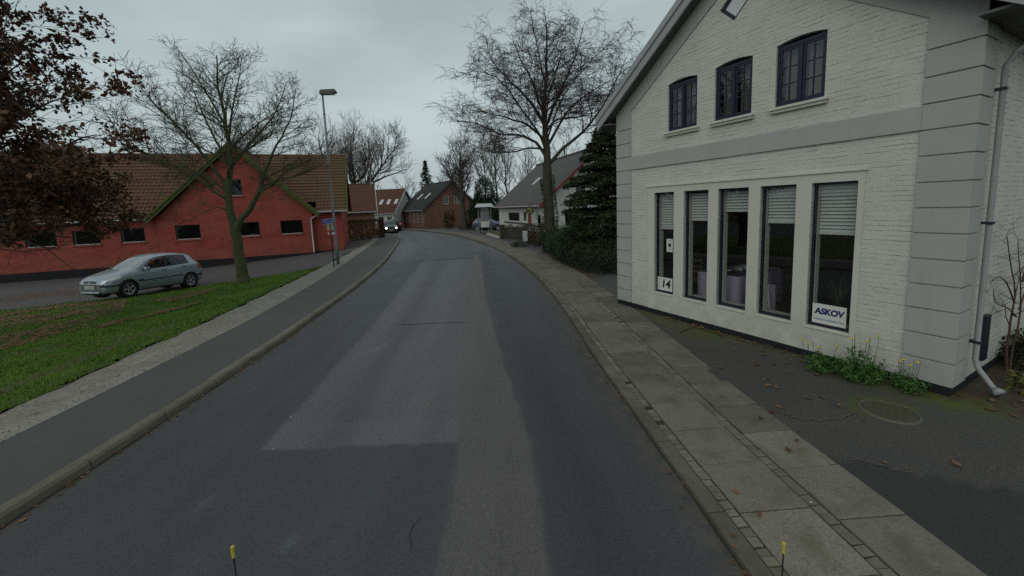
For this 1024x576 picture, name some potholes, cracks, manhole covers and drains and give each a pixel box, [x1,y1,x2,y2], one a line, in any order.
manhole cover [857,399,923,425]
crack [848,459,916,473]
crack [752,393,855,421]
